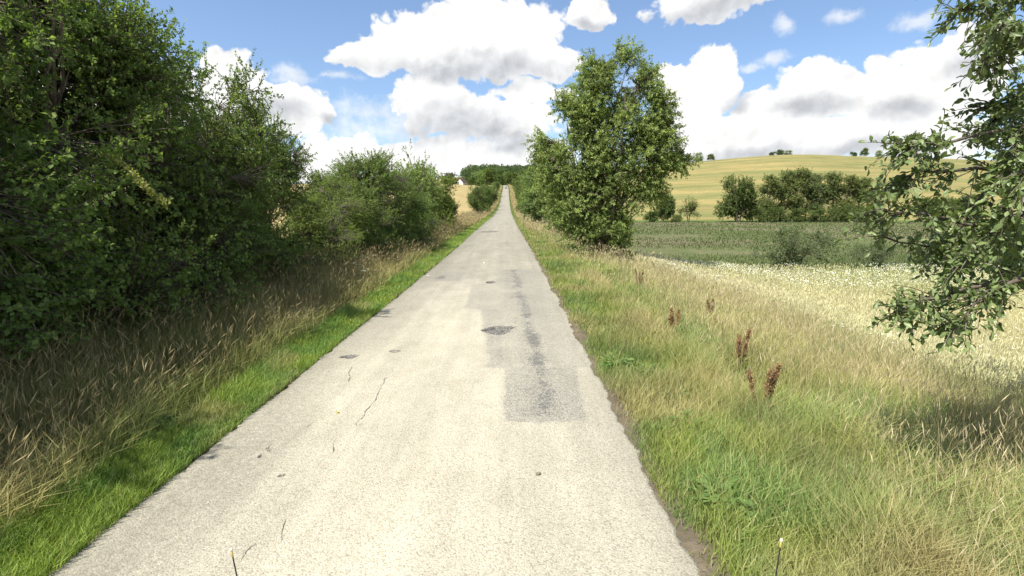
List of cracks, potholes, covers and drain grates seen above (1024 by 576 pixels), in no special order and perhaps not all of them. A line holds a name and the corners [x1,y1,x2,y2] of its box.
pothole [470,322,527,338]
